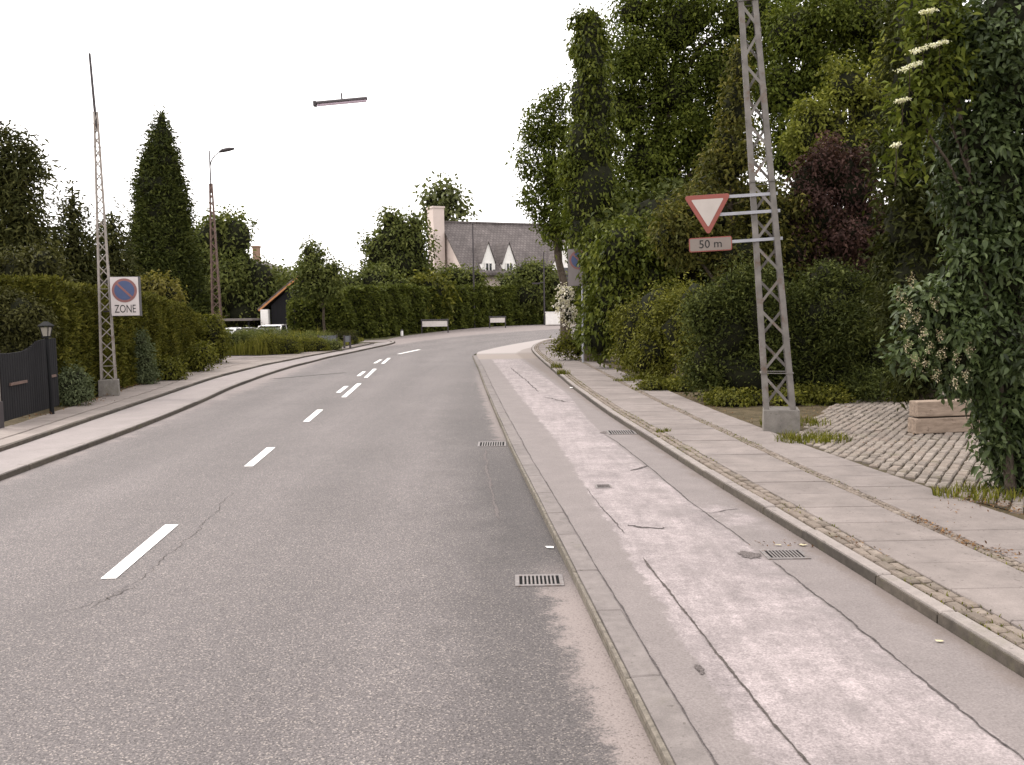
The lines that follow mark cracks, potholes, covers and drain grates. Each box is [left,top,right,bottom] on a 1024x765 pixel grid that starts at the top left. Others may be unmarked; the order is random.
crack [53,493,233,615]
crack [604,434,1024,765]
crack [589,491,667,532]
drain grate [759,549,811,560]
drain grate [515,574,565,587]
